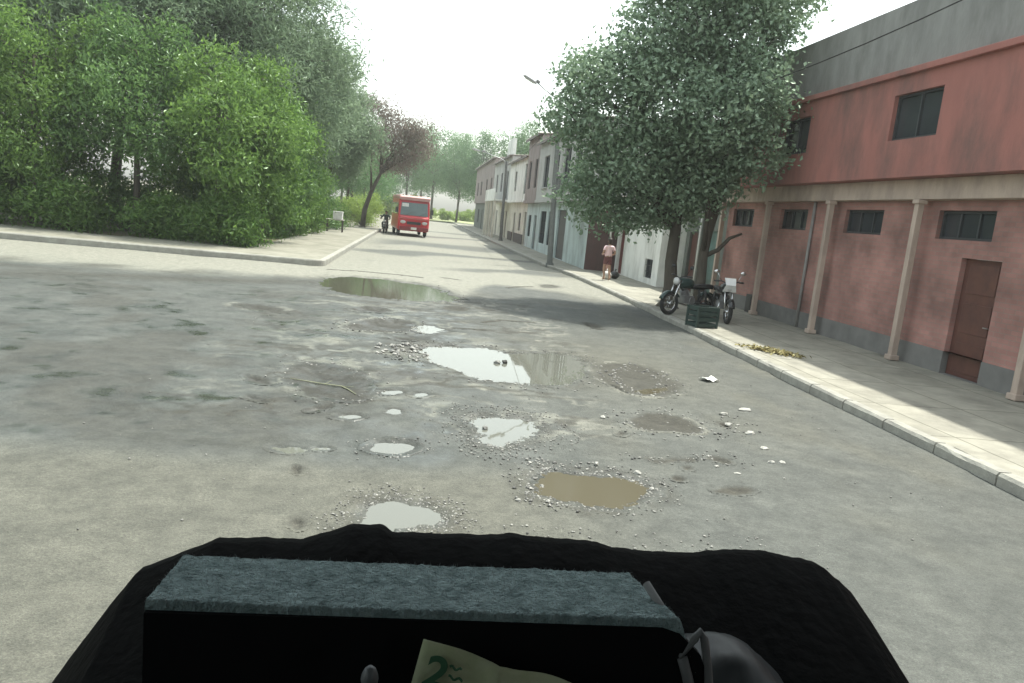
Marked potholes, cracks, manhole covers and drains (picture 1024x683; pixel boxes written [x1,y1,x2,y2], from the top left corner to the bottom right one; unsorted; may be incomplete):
pothole [401,342,599,389]
pothole [326,412,371,422]
pothole [330,492,459,534]
pothole [273,360,379,403]
pothole [411,323,449,335]
pothole [625,411,709,435]
pothole [382,407,407,415]
pothole [707,484,761,497]
pothole [357,436,427,458]
pothole [515,463,672,515]
pothole [584,361,692,399]
pothole [309,275,466,304]
